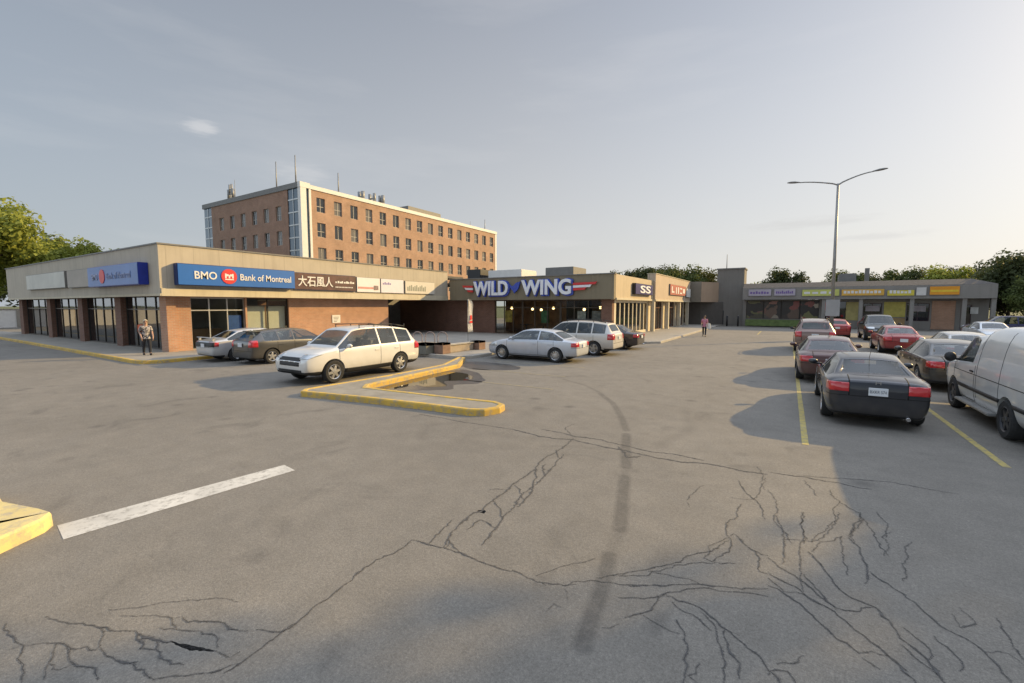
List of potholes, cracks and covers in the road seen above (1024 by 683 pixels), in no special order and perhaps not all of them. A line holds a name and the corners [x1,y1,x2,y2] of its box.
crack [4,597,248,680]
pothole [172,641,215,652]
crack [421,414,957,551]
crack [538,467,1022,683]
